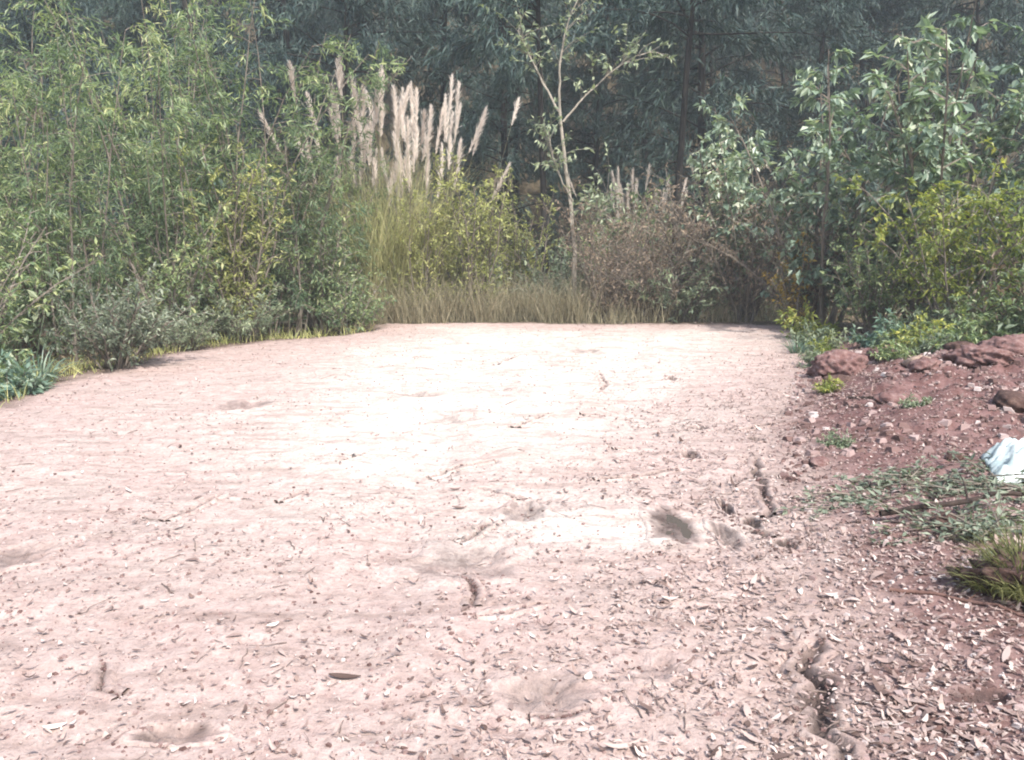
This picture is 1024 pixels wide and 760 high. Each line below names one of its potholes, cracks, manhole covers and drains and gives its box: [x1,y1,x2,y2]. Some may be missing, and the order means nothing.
crack [733,456,781,539]
pothole [638,496,708,557]
pothole [479,665,612,724]
pothole [702,517,750,556]
pothole [491,498,553,528]
pothole [197,399,287,412]
